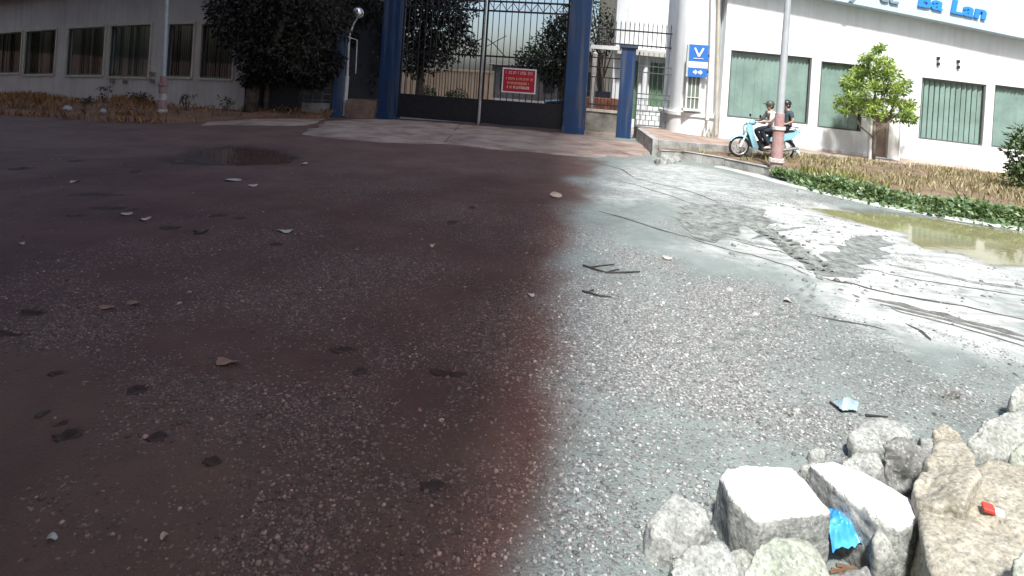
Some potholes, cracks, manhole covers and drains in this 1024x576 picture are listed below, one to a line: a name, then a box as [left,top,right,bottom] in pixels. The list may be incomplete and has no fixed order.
pothole [174,146,301,166]
crack [564,140,808,275]
crack [810,268,1024,341]
pothole [51,428,83,442]
